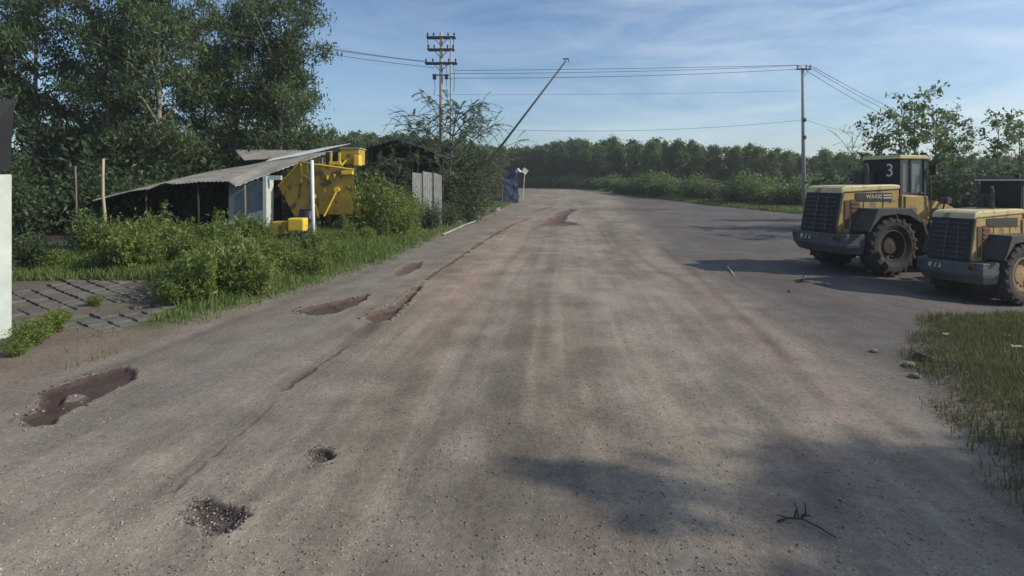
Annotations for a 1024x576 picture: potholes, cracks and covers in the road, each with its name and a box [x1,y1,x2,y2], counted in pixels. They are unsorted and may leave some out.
pothole [530,208,583,228]
pothole [291,292,375,317]
pothole [8,364,146,432]
pothole [297,442,348,470]
pothole [171,492,263,546]
pothole [356,283,429,325]
pothole [384,260,430,278]
